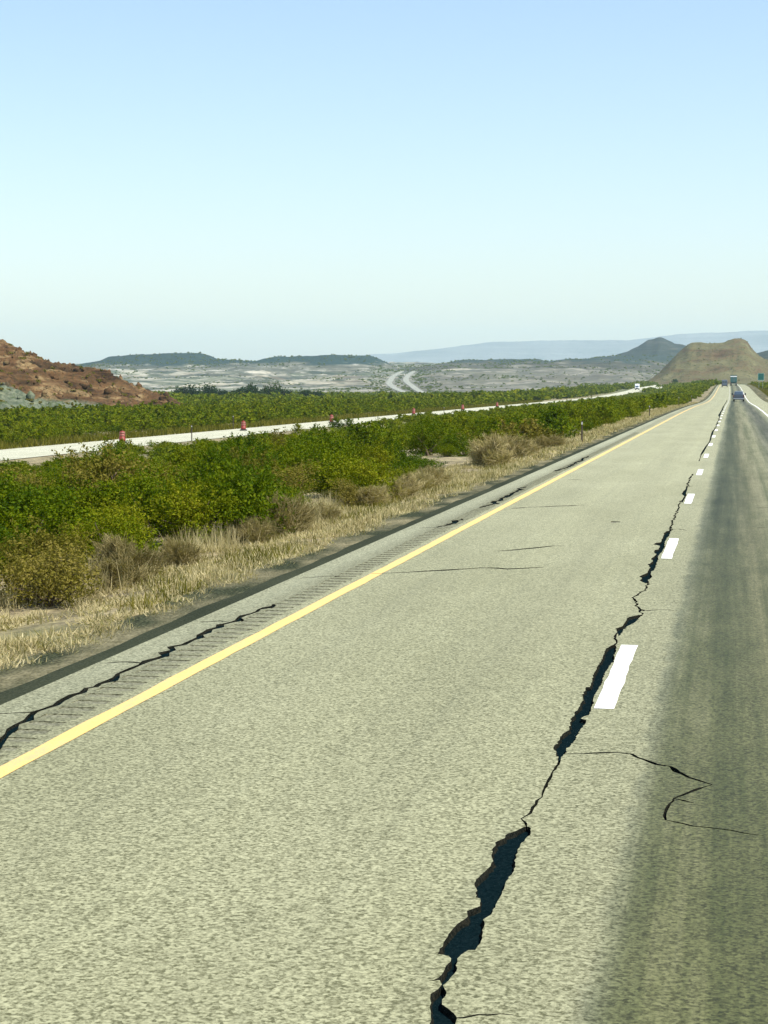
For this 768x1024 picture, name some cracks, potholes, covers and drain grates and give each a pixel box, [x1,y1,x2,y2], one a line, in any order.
crack [430,400,764,1024]
crack [0,604,276,749]
